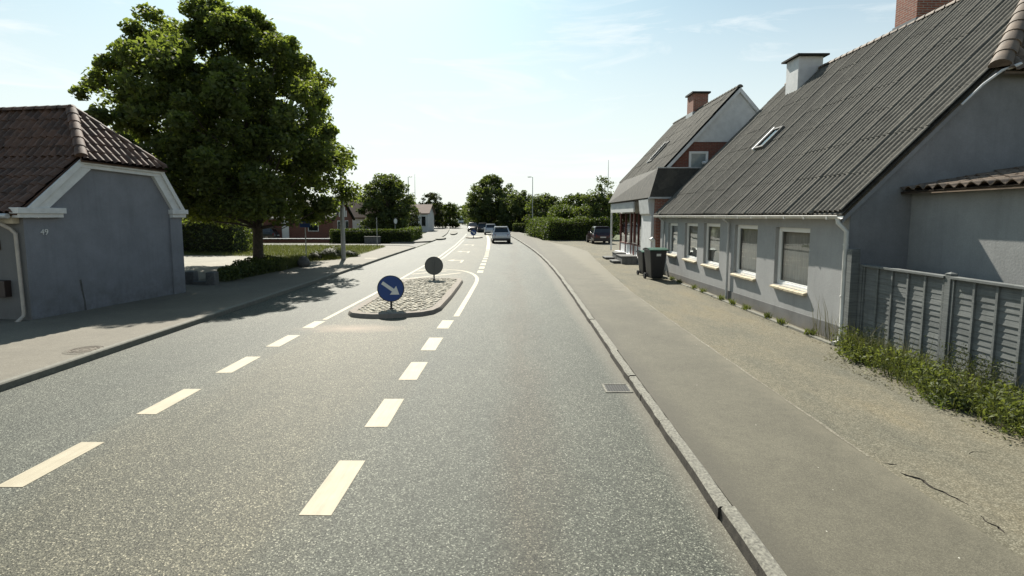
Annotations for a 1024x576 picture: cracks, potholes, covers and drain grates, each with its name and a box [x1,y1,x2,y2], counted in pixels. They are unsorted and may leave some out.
drain grate [601,384,633,393]
manhole cover [62,346,106,354]
